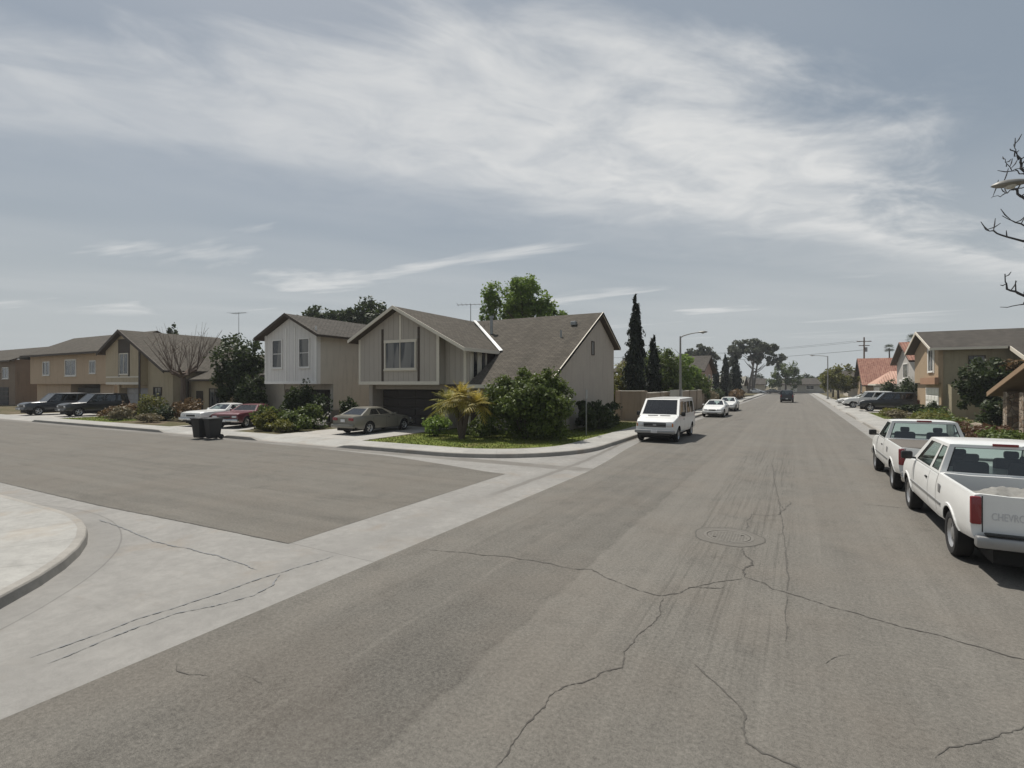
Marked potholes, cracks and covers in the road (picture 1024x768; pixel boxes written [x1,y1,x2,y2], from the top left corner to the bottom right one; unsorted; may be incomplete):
crack [100,520,254,569]
manhole cover [695,527,766,547]
crack [428,465,1022,768]
